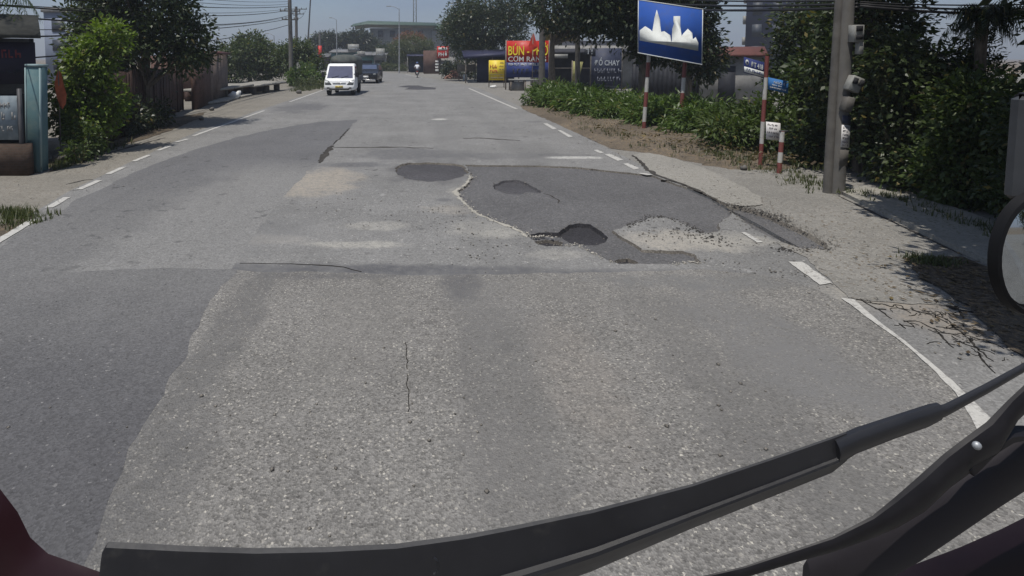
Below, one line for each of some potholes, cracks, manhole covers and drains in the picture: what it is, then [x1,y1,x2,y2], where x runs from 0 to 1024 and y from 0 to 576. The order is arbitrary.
crack [318,129,413,163]
